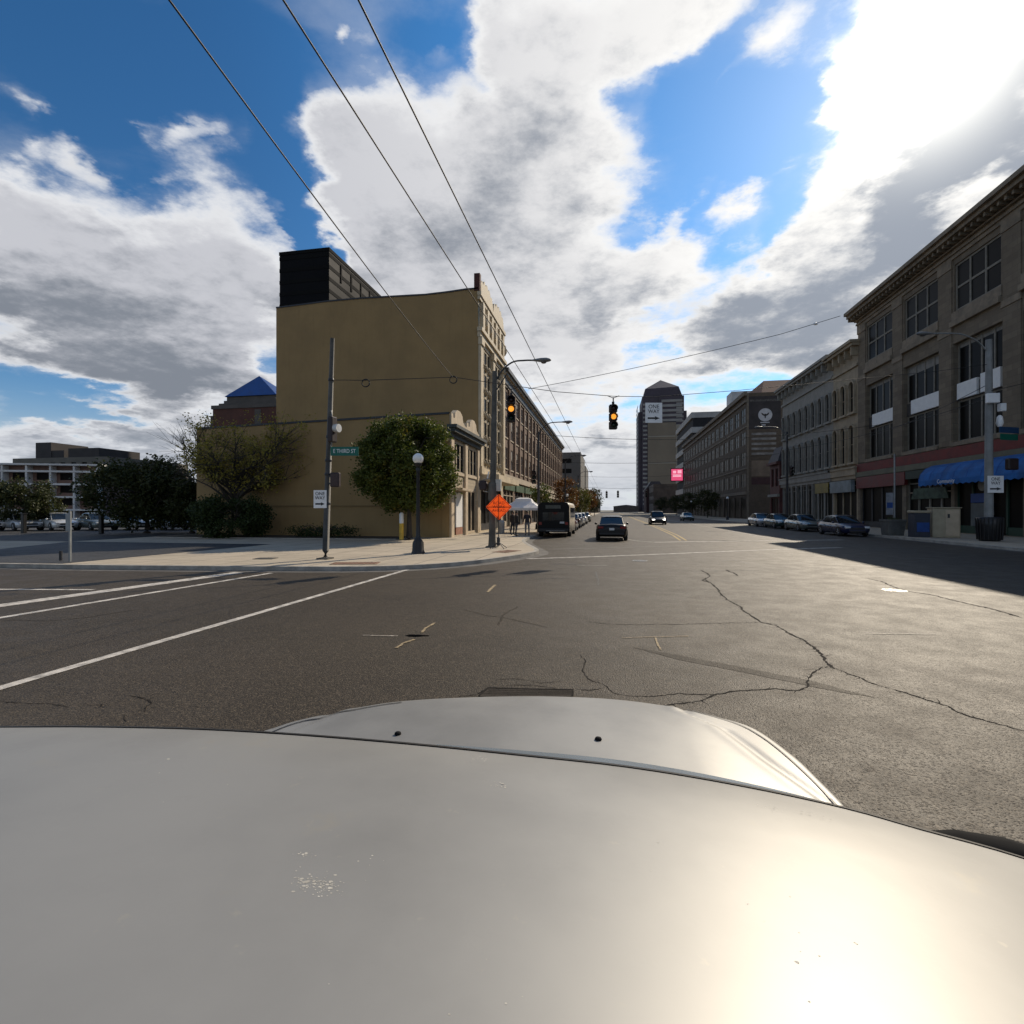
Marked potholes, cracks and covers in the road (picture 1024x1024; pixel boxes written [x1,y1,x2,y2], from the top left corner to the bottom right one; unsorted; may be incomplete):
crack [463,560,1020,730]
